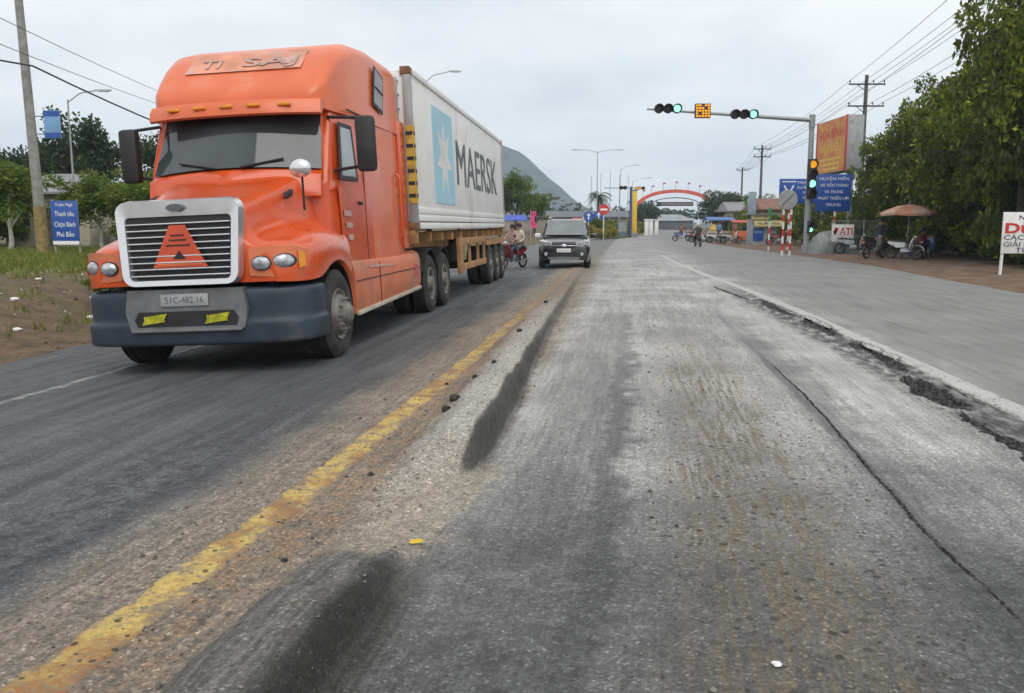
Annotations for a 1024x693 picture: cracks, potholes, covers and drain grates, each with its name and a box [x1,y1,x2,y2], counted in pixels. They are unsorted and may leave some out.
crack [761,359,1024,639]
pothole [793,315,844,339]
pothole [891,374,985,415]
pothole [752,297,804,319]
pothole [841,340,919,375]
